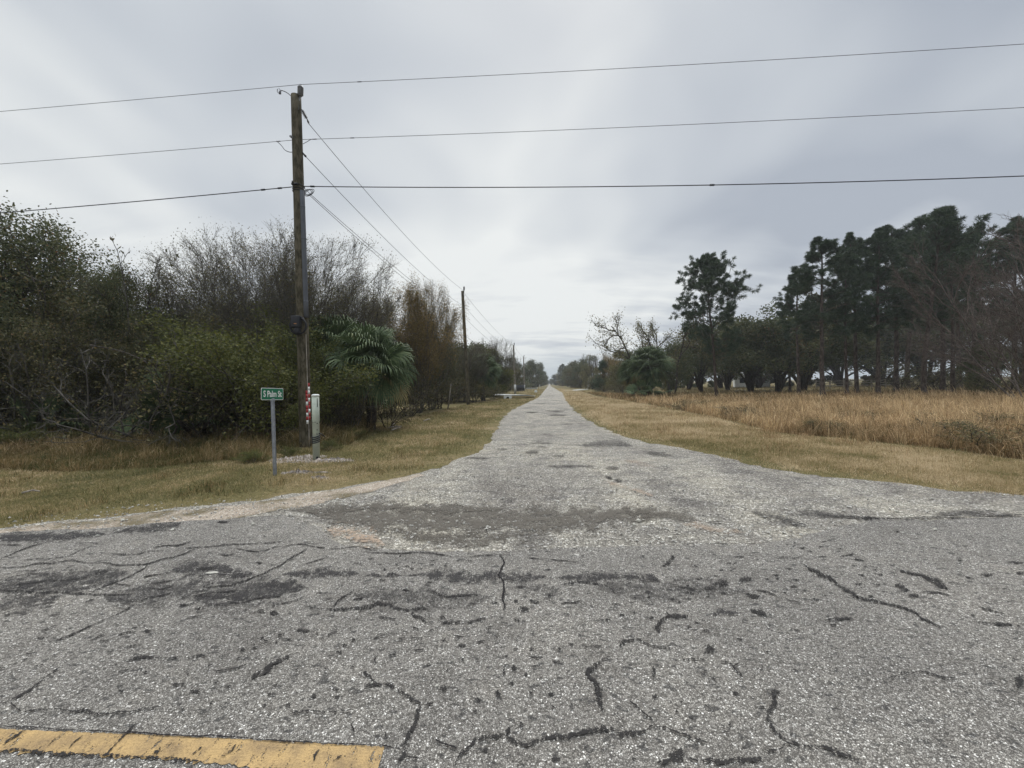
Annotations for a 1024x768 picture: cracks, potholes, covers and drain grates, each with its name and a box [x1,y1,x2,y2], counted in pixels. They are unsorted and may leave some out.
crack [815,514,1024,532]
crack [0,541,859,765]
crack [750,553,972,627]
crack [890,670,956,678]
crack [971,606,1020,626]
